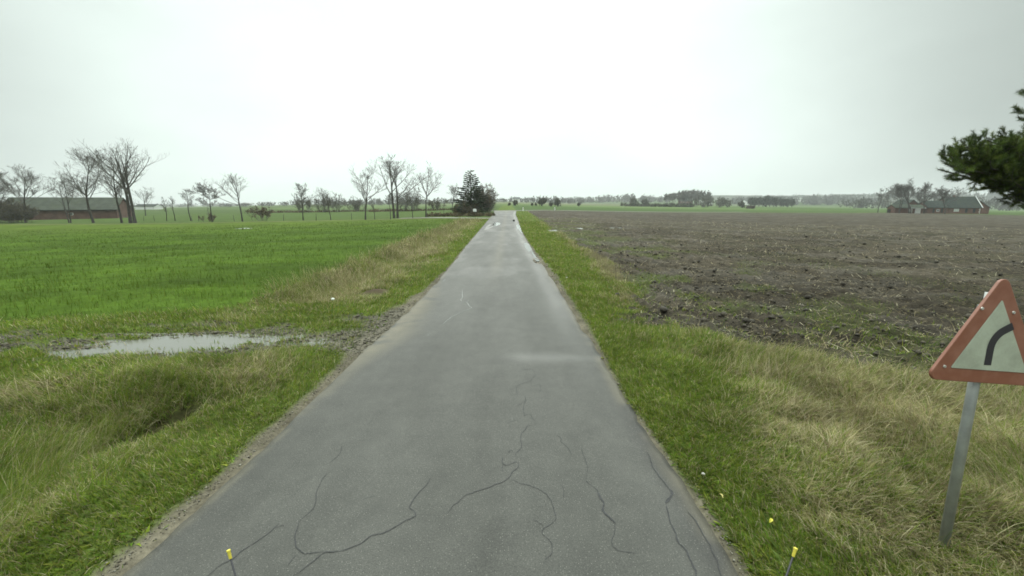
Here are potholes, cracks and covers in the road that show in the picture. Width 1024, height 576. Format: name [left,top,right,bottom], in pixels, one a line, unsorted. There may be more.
crack [210,447,428,576]
crack [557,435,632,553]
crack [448,371,564,561]
crack [688,512,722,576]
